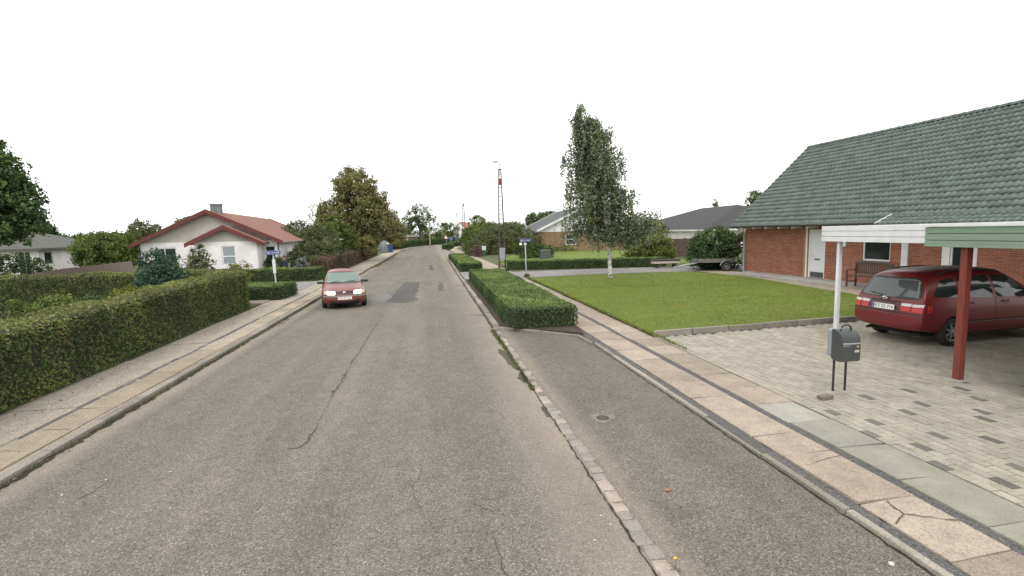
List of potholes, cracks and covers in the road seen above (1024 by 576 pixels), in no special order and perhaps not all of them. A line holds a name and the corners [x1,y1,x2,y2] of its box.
crack [289,427,317,449]
manhole cover [590,414,615,423]
crack [474,498,509,576]
crack [331,358,354,399]
crack [887,501,958,524]
